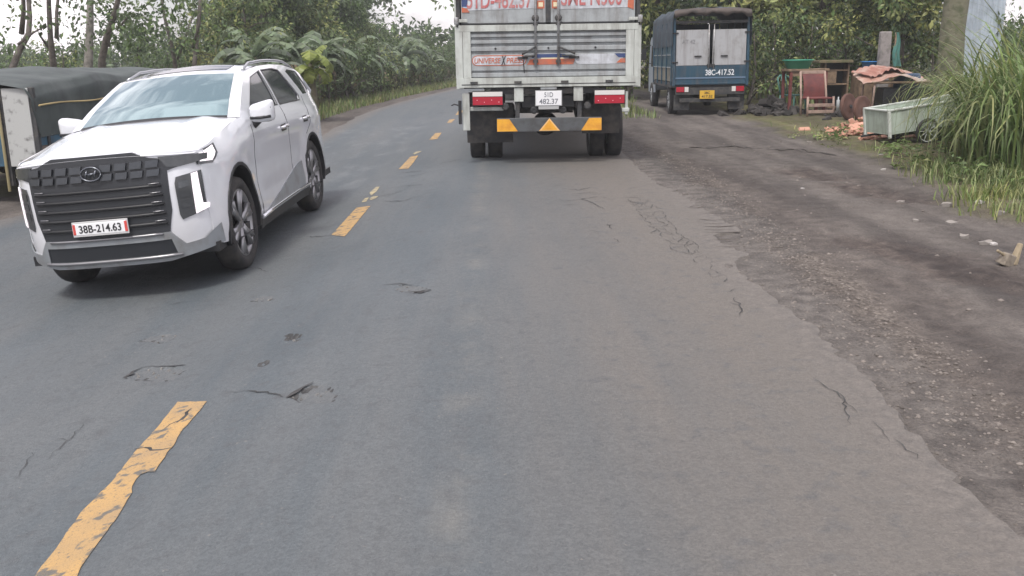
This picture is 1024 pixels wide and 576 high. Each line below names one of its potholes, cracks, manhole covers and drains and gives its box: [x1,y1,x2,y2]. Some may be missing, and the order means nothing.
pothole [392,284,436,295]
pothole [288,378,346,404]
pothole [257,359,270,371]
crack [701,146,835,155]
crack [817,380,854,424]
crack [568,187,733,290]
crack [136,408,192,451]
pothole [137,332,179,345]
pothole [128,366,188,385]
pothole [284,333,304,344]
